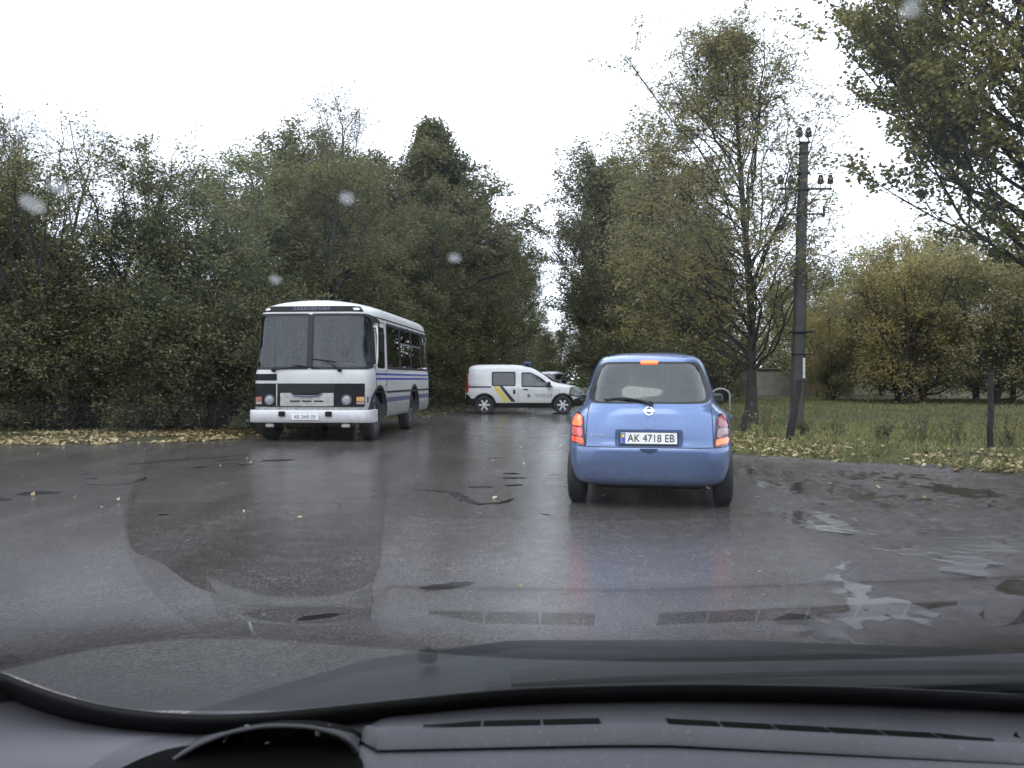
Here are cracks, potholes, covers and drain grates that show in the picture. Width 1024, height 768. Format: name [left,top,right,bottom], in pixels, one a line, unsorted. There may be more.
crack [87,448,254,486]
crack [418,486,514,505]
